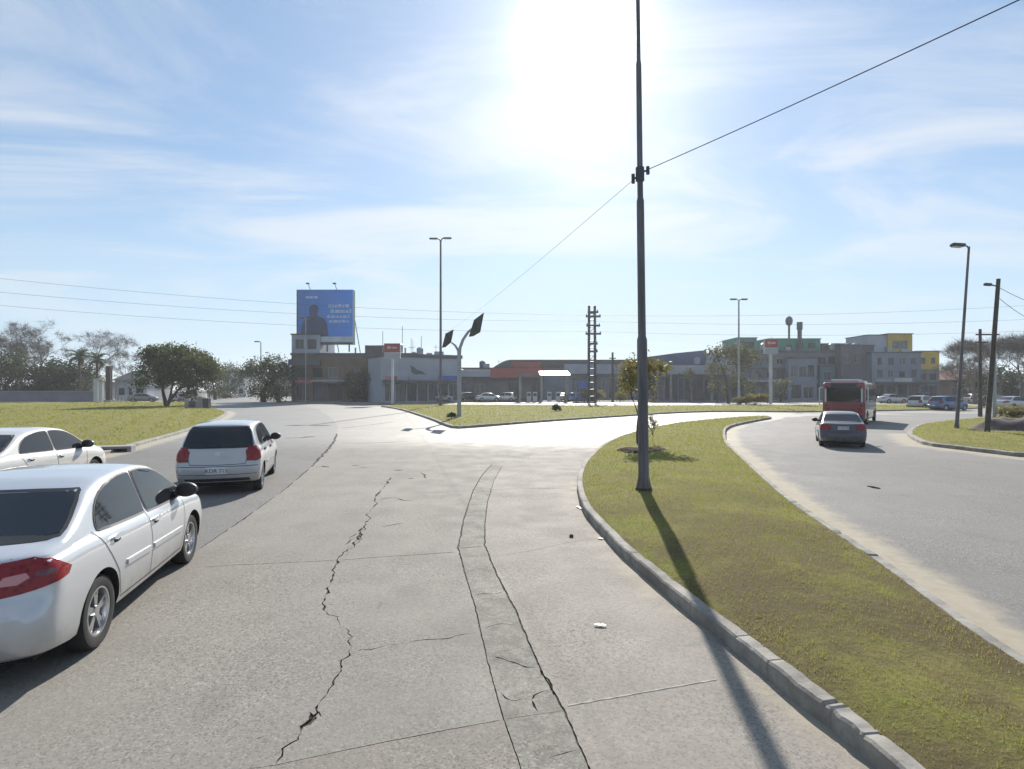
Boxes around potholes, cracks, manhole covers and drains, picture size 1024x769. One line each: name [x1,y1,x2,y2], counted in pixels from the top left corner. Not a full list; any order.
crack [254,470,464,763]
